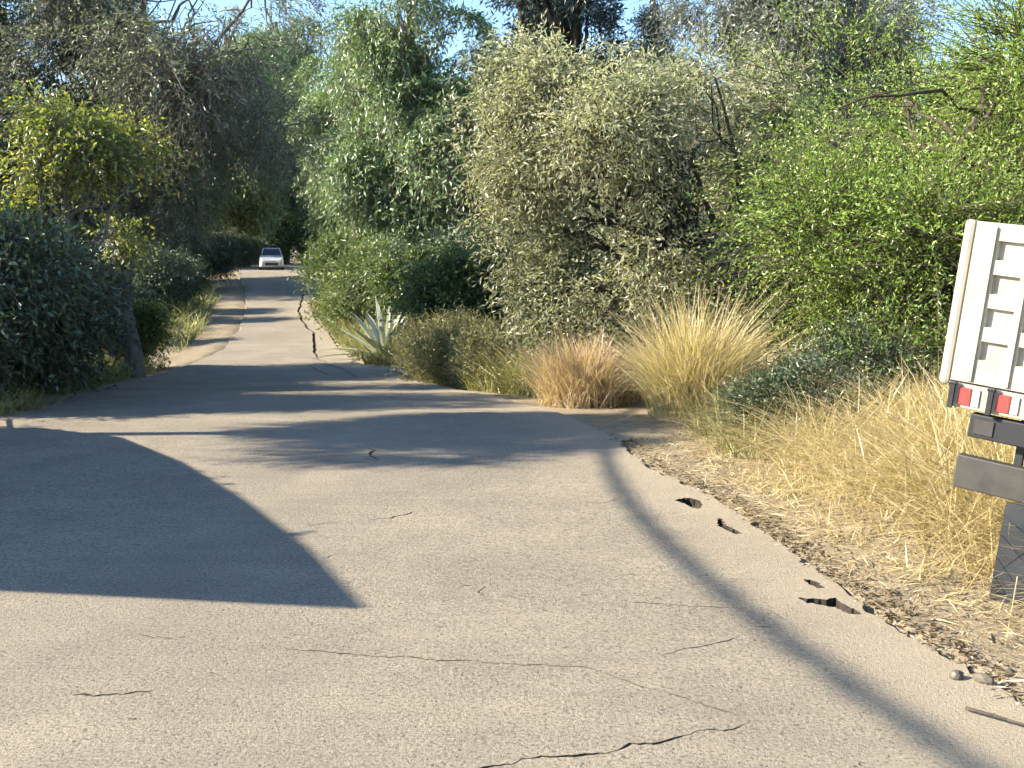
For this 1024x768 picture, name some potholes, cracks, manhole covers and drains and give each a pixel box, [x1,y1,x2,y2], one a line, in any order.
pothole [675,498,703,509]
crack [297,288,357,377]
crack [285,649,748,768]
pothole [798,597,861,614]
crack [635,602,760,627]
pothole [717,518,742,534]
